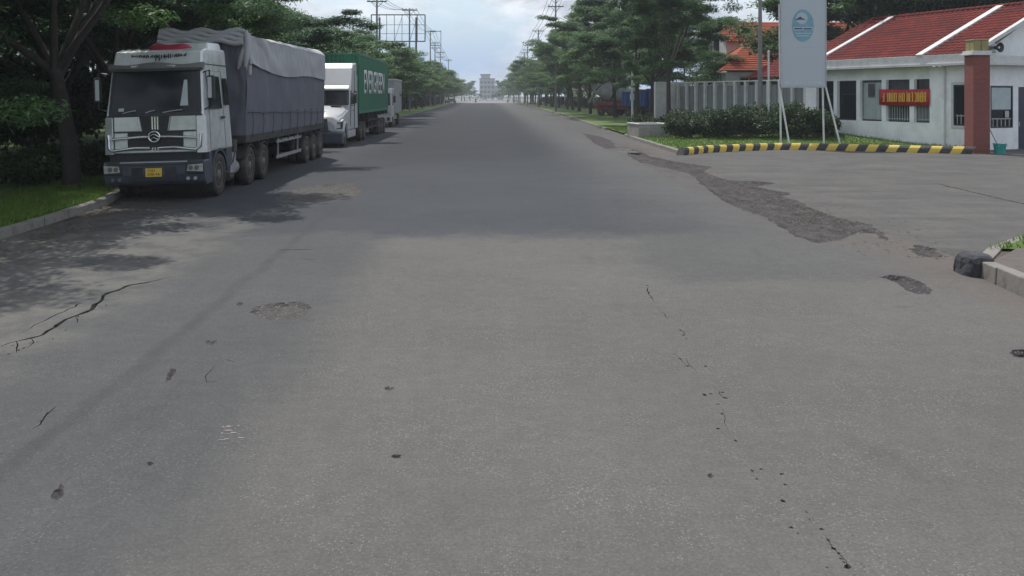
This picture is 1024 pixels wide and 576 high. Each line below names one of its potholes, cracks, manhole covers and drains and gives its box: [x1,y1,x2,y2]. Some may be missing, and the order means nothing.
crack [0,277,171,355]
pothole [51,482,64,500]
pothole [249,302,312,320]
pothole [1009,349,1024,358]
crack [646,285,851,569]
